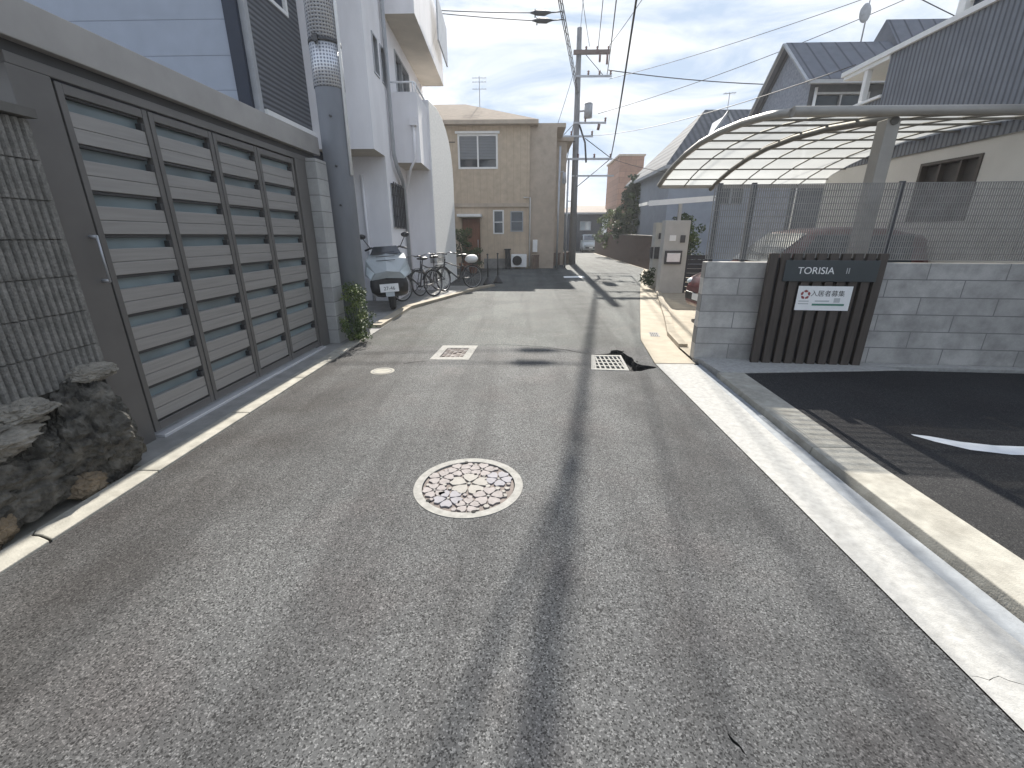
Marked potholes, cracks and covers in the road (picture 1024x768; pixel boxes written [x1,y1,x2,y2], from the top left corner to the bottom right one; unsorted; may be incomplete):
manhole cover [413,458,523,519]
drain grate [591,355,630,371]
pothole [595,350,657,371]
